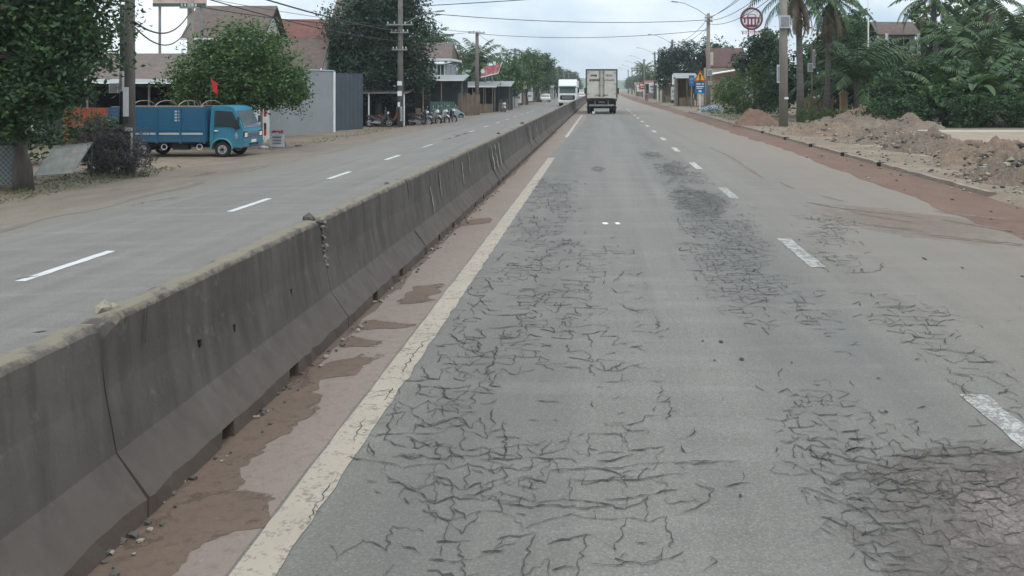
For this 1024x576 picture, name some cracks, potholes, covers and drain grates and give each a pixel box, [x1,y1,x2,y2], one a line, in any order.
crack [331,153,1024,576]
